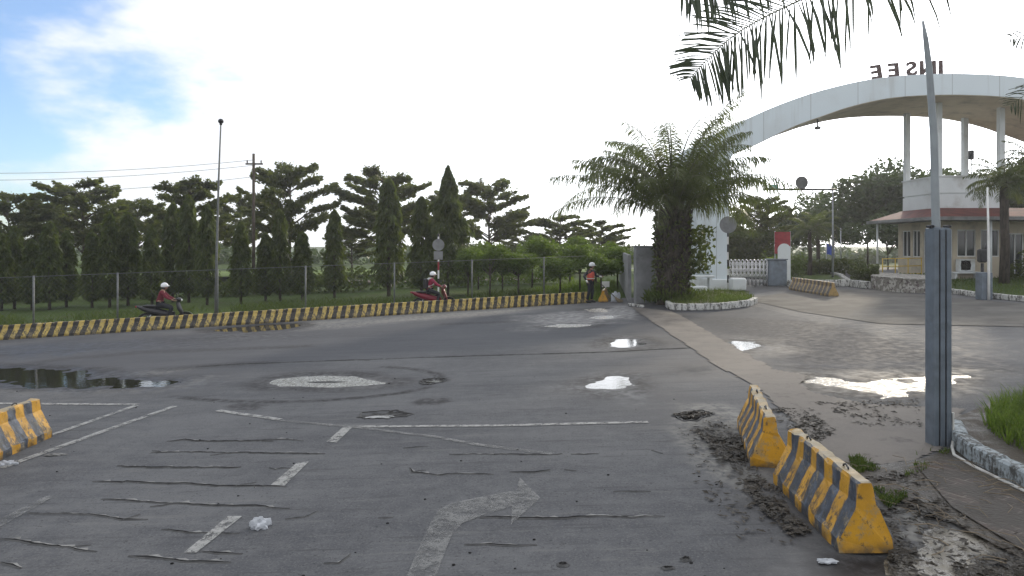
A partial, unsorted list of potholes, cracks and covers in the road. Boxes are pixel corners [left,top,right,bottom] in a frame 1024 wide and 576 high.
pothole [419,377,448,385]
crack [323,553,351,564]
pothole [671,409,715,421]
crack [409,453,599,476]
crack [0,438,326,569]
pothole [358,410,414,419]
